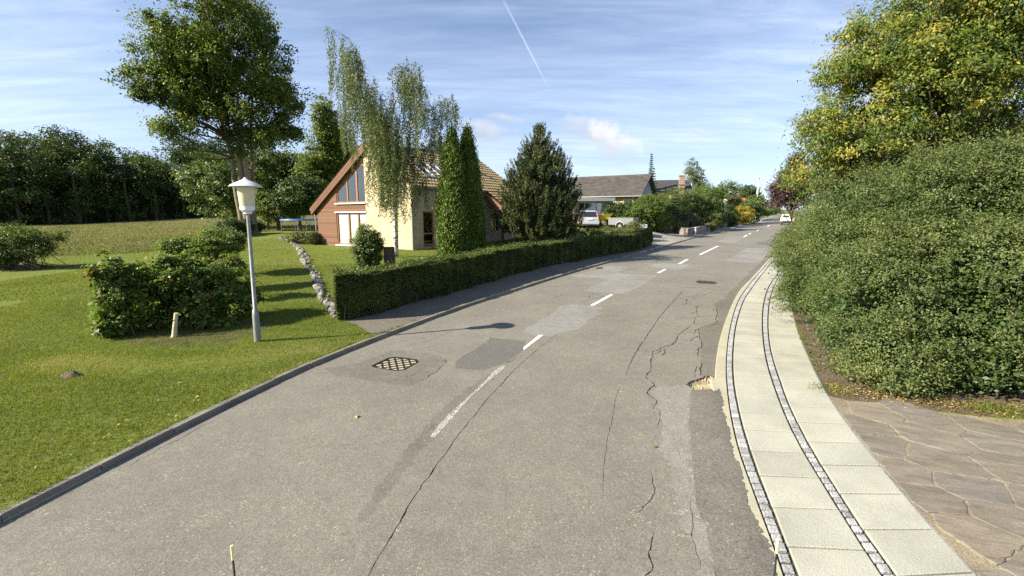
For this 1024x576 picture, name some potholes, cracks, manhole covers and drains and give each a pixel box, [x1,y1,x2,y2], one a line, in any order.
pothole [686,376,714,390]
crack [646,273,718,428]
crack [690,501,701,567]
crack [636,472,655,576]
